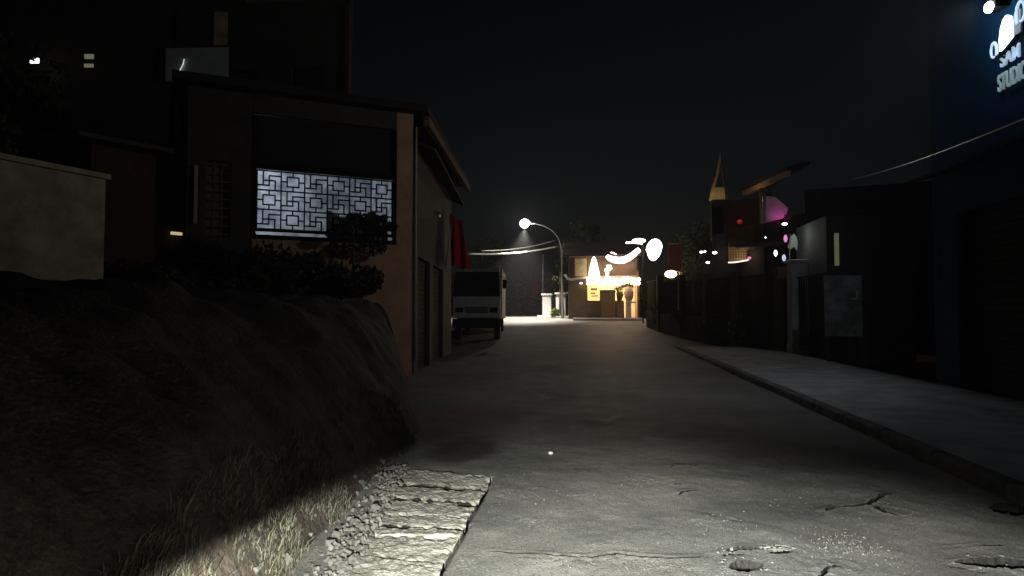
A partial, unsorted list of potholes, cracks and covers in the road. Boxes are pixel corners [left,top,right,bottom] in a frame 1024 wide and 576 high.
pothole [975,500,1024,520]
pothole [712,543,797,556]
pothole [939,553,1024,576]
crack [660,463,713,500]
crack [473,547,725,563]
crack [811,492,916,521]
pothole [714,555,780,576]
